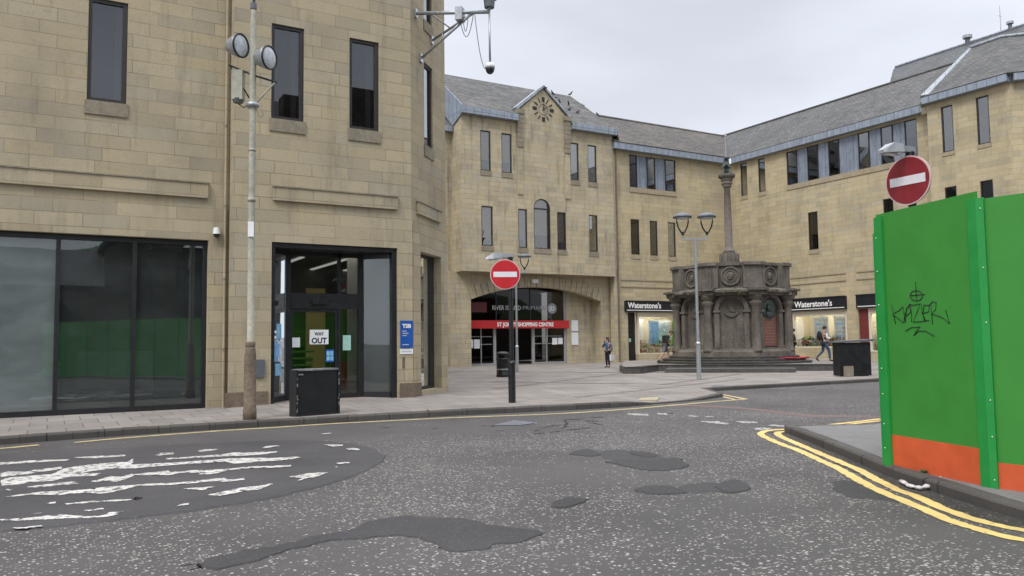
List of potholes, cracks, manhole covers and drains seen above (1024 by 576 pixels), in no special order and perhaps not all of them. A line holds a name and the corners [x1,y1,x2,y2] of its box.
crack [533,417,601,434]
